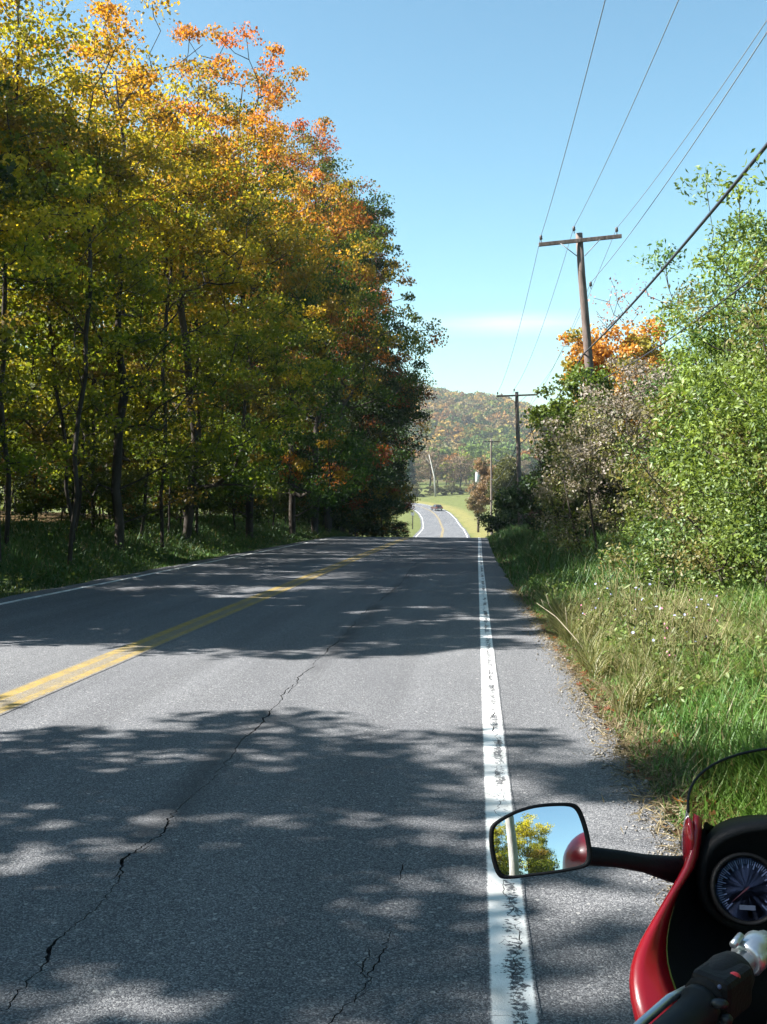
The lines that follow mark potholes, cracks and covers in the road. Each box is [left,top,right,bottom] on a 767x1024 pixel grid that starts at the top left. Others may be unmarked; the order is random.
crack [328,865,403,1024]
crack [6,587,396,1010]
